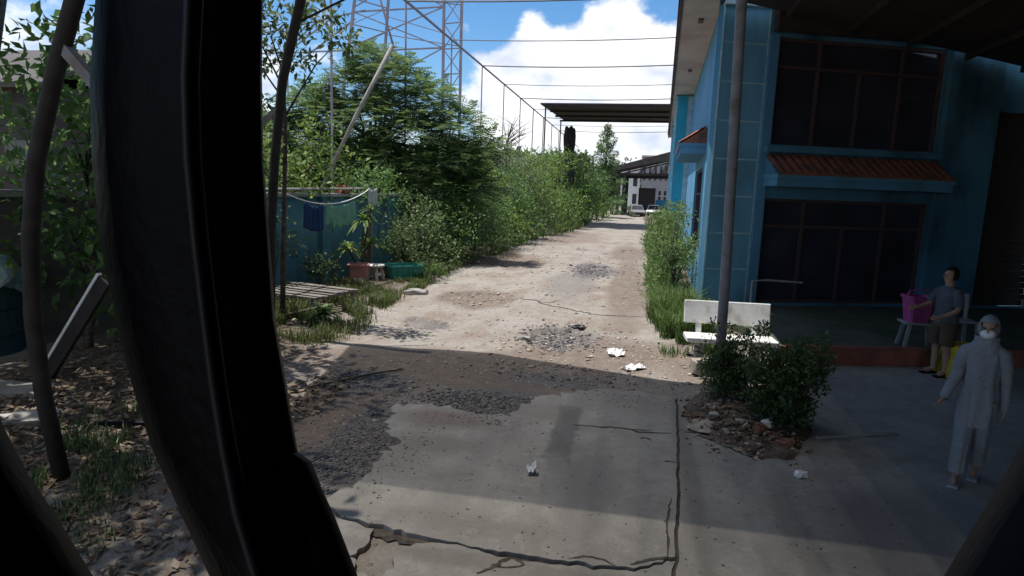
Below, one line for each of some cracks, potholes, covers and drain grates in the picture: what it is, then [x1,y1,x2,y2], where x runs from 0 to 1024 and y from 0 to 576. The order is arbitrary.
crack [335,398,755,576]
pothole [575,265,619,277]
pothole [520,325,609,353]
crack [500,298,641,317]
